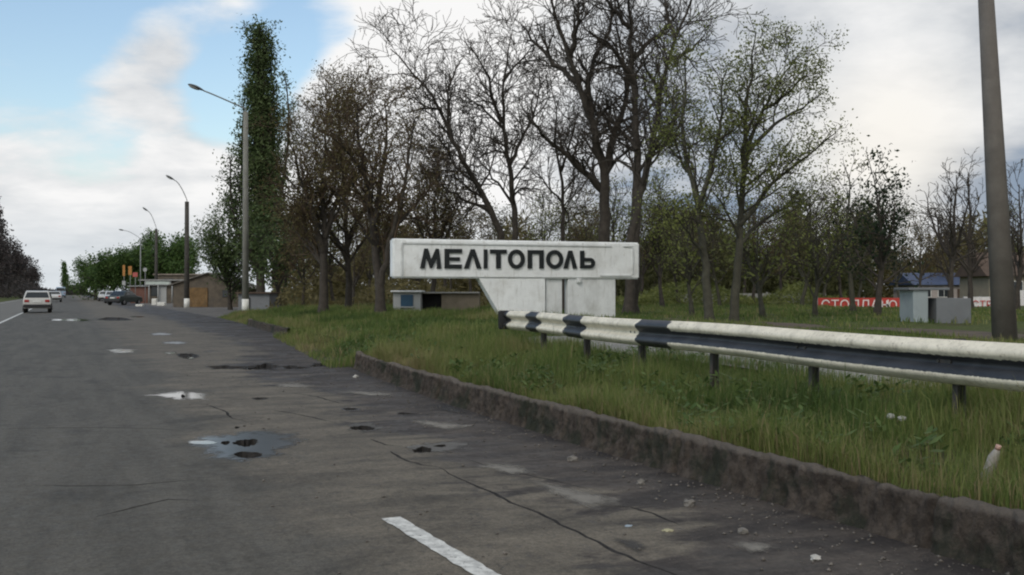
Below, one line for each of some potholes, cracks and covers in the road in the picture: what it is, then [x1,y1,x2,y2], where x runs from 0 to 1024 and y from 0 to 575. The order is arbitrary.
crack [371,439,680,575]
pothole [233,439,258,447]
crack [40,480,204,517]
